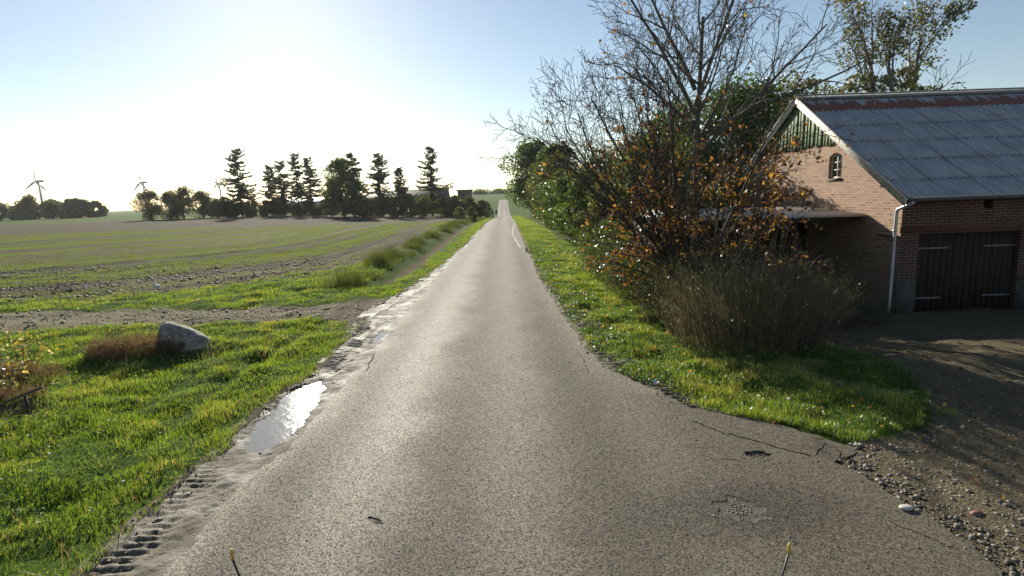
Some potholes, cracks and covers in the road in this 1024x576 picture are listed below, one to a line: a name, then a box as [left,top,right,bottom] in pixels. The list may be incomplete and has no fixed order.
pothole [744,450,772,459]
crack [691,420,842,461]
crack [888,520,972,556]
